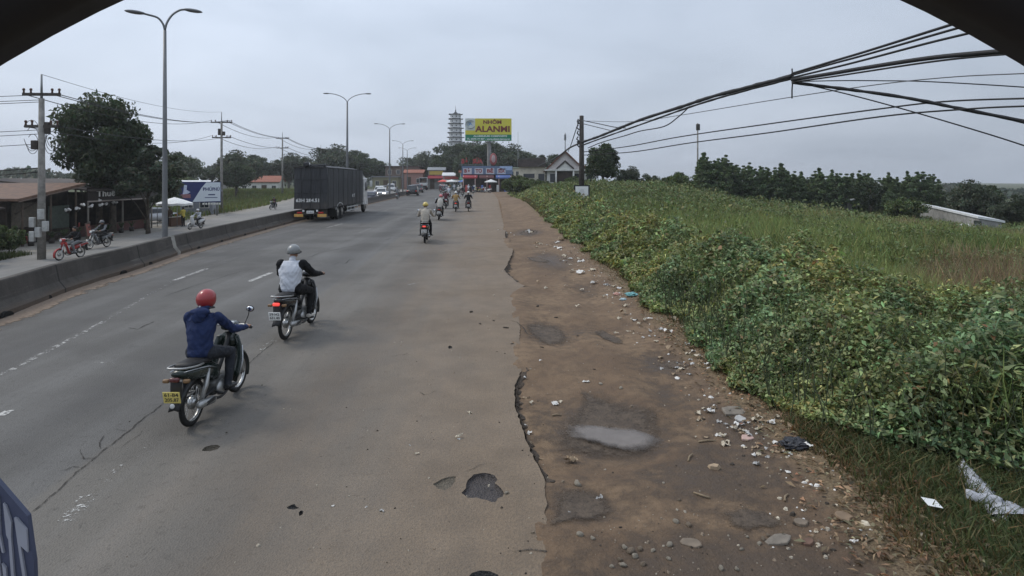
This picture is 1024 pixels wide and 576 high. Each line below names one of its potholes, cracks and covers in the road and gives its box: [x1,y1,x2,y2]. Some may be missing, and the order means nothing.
pothole [527,324,565,345]
crack [35,405,161,509]
pothole [462,473,504,502]
pothole [560,391,658,457]
pothole [596,330,622,343]
pothole [433,476,456,490]
